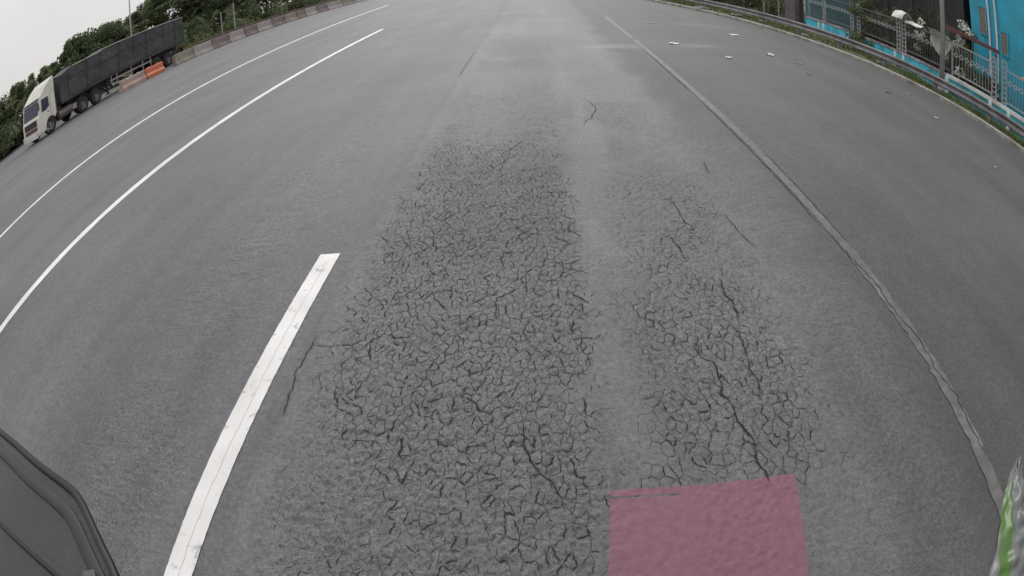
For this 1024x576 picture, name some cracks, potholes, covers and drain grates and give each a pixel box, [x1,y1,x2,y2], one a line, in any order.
crack [178,77,615,576]
crack [597,174,844,496]
